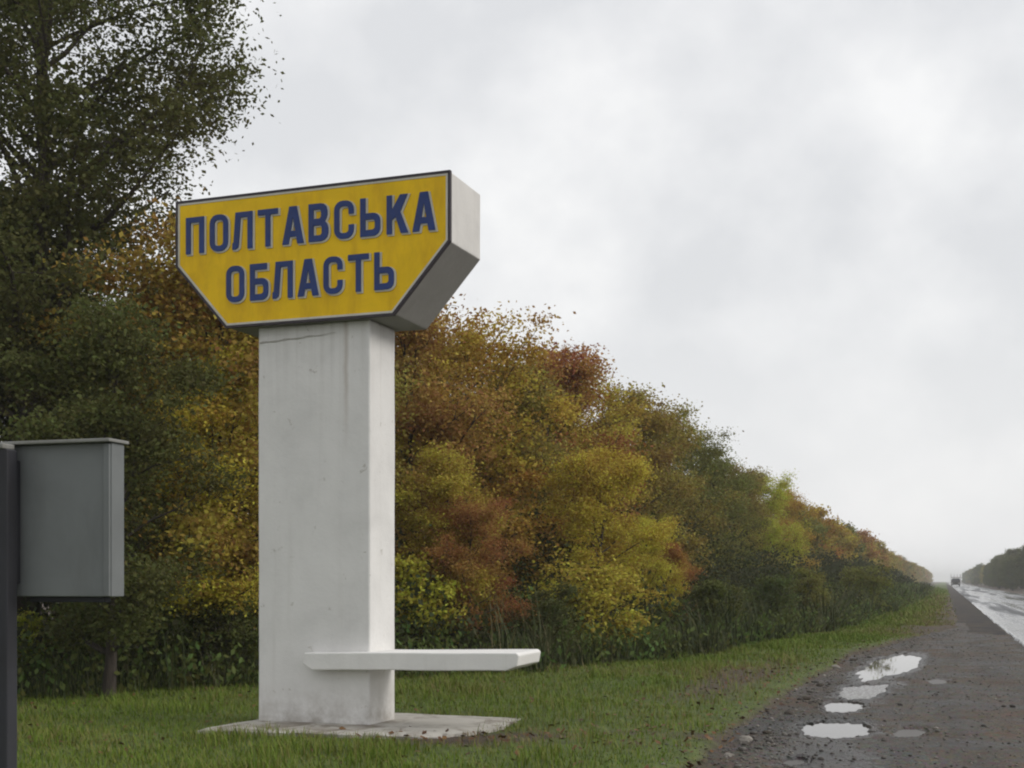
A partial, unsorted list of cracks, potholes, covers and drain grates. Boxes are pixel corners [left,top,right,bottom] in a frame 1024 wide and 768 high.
pothole [849,652,926,687]
pothole [818,700,869,714]
pothole [924,676,953,685]
pothole [883,725,933,738]
pothole [791,719,881,740]
pothole [831,682,895,703]
